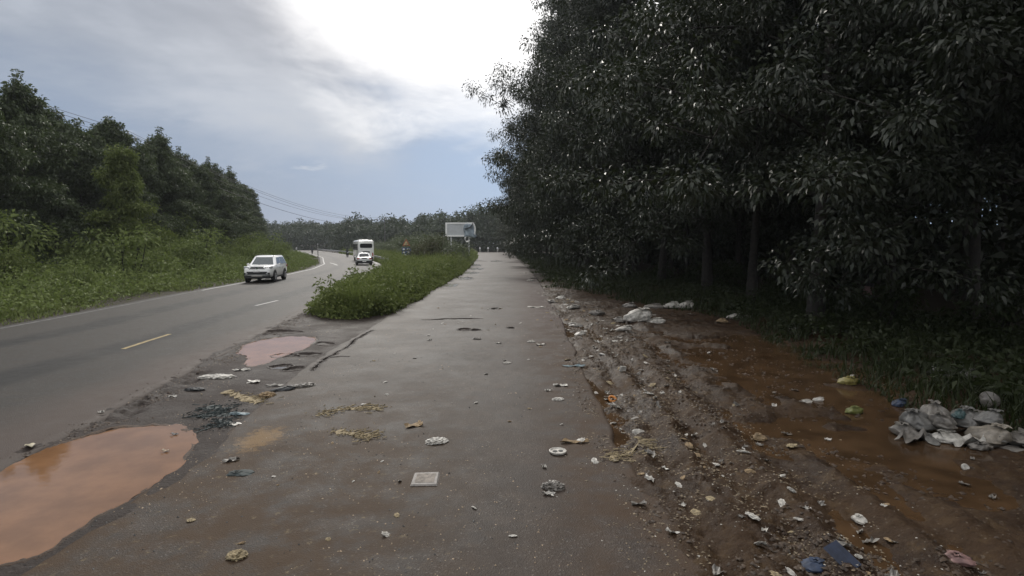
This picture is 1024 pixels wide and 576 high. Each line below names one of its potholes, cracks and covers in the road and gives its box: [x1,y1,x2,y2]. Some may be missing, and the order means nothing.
pothole [0,423,199,567]
pothole [236,336,318,367]
